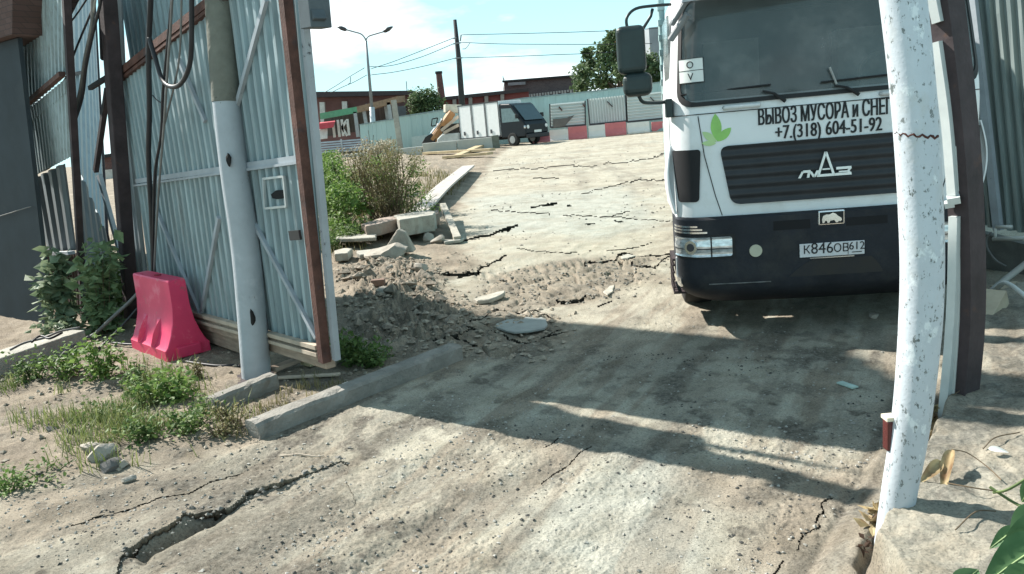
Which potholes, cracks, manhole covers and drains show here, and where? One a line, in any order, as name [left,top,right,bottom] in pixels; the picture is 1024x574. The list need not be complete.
crack [773,498,833,574]
crack [438,202,670,279]
crack [71,473,243,526]
crack [541,436,592,485]
